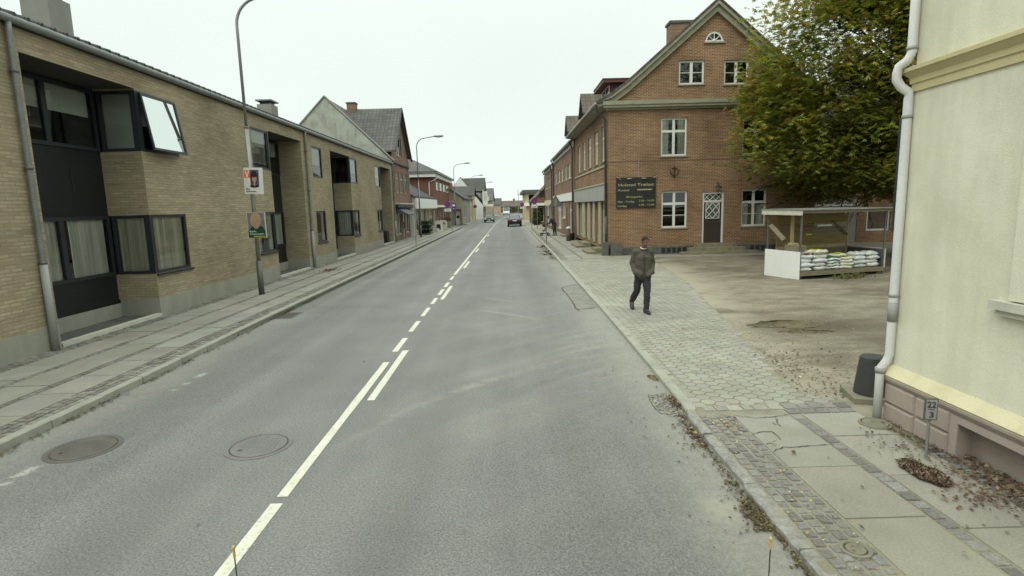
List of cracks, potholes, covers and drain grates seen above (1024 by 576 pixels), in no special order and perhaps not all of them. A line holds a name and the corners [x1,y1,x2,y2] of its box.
manhole cover [41,435,124,464]
pothole [650,393,679,412]
utility cover [858,417,893,430]
crack [736,414,827,451]
manhole cover [223,432,294,461]
utility cover [839,540,873,559]
